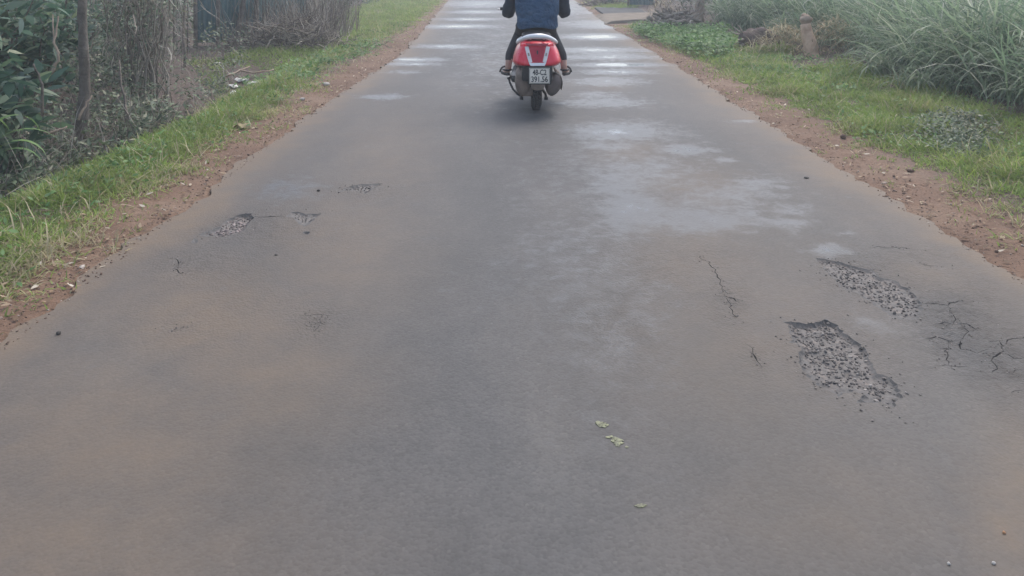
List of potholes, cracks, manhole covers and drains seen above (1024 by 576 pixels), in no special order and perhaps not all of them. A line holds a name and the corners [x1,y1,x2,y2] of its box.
crack [921,300,1024,397]
crack [698,256,765,366]
pothole [770,314,922,424]
pothole [197,212,275,239]
pothole [799,258,944,329]
pothole [272,210,321,227]
pothole [331,182,389,195]
